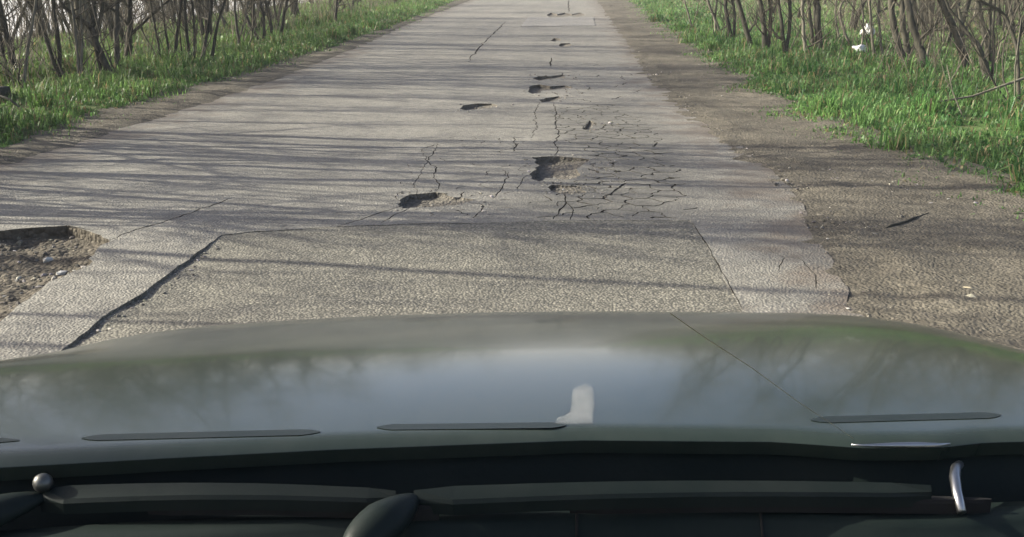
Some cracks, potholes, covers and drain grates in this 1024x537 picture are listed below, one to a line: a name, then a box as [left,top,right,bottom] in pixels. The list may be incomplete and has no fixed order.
pothole [530,156,589,181]
crack [68,198,230,240]
crack [337,58,696,227]
pothole [528,84,573,94]
pothole [398,192,474,208]
pothole [0,225,110,321]
